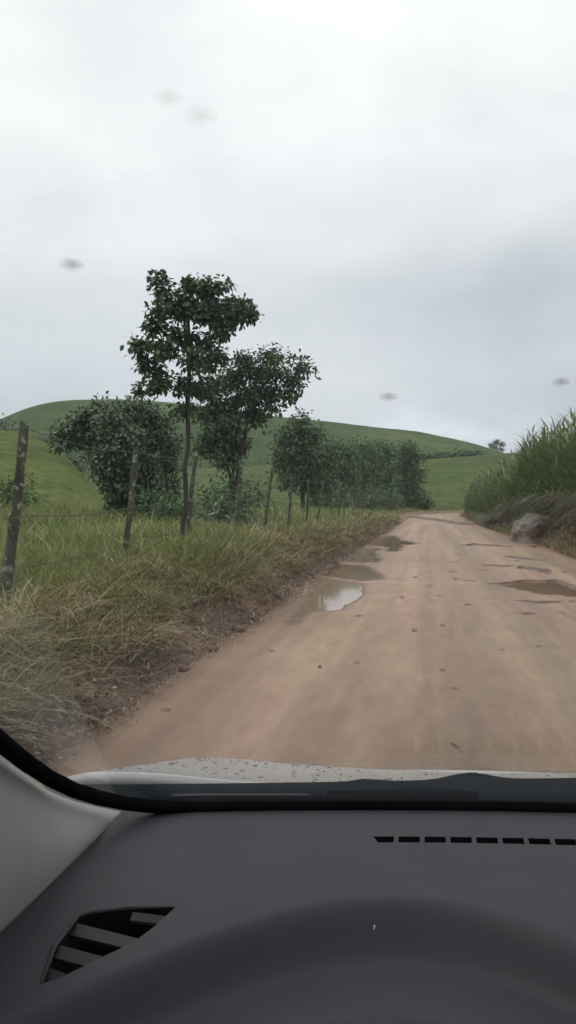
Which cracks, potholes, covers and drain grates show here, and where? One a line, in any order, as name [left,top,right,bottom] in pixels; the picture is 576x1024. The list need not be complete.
pothole [287,577,364,624]
pothole [518,566,552,574]
pothole [345,548,385,563]
pothole [370,535,418,552]
pothole [490,579,576,597]
pothole [321,565,384,581]
